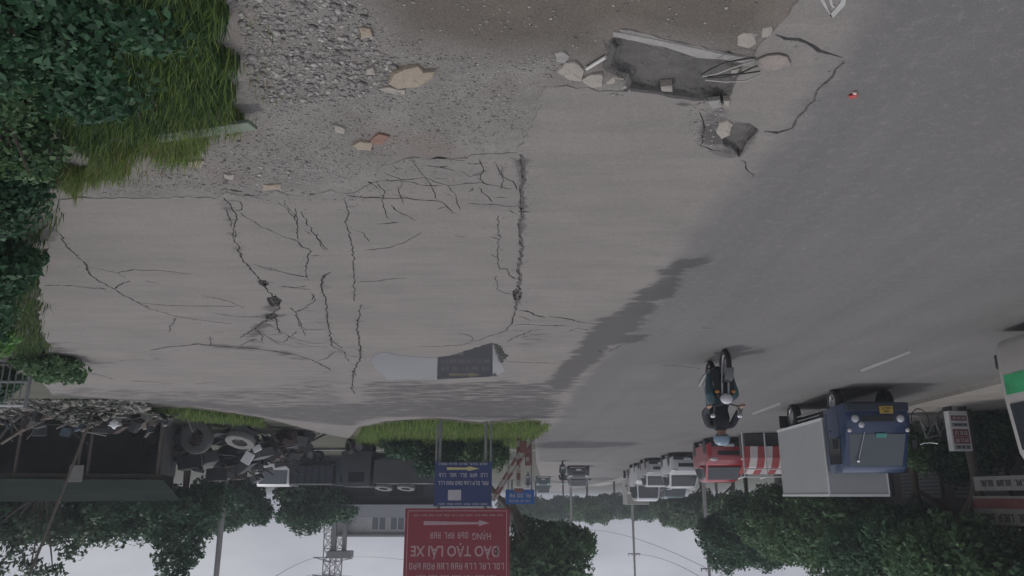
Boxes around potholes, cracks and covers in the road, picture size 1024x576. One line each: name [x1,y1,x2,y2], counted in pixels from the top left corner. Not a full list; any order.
pothole [723,122,758,156]
crack [775,34,841,57]
crack [699,112,754,176]
crack [48,188,358,370]
pothole [603,37,742,101]
crack [348,157,517,250]
crack [433,310,594,363]
